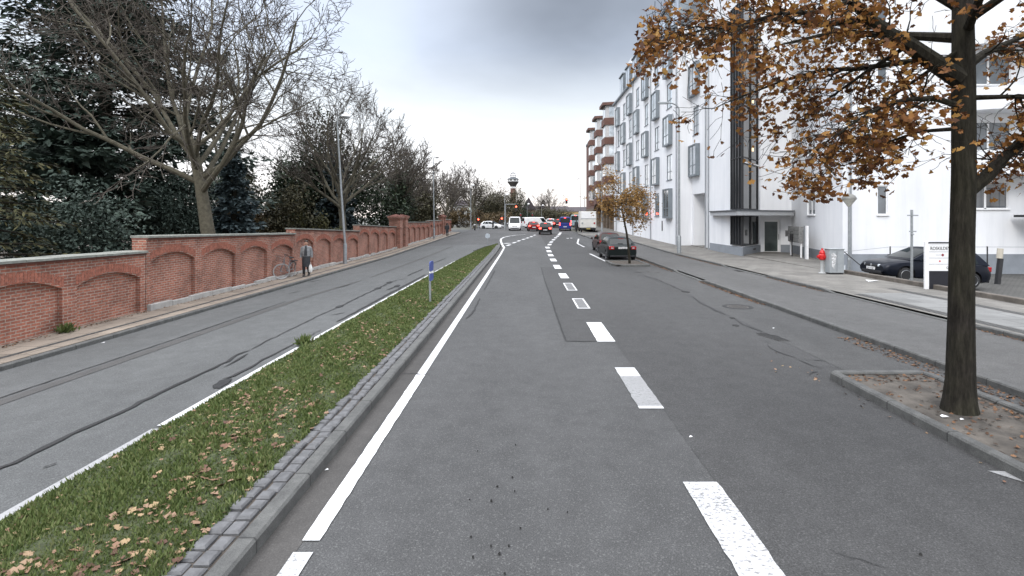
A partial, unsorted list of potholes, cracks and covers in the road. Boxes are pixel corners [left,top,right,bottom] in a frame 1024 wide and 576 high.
crack [735,319,824,375]
crack [466,271,495,319]
